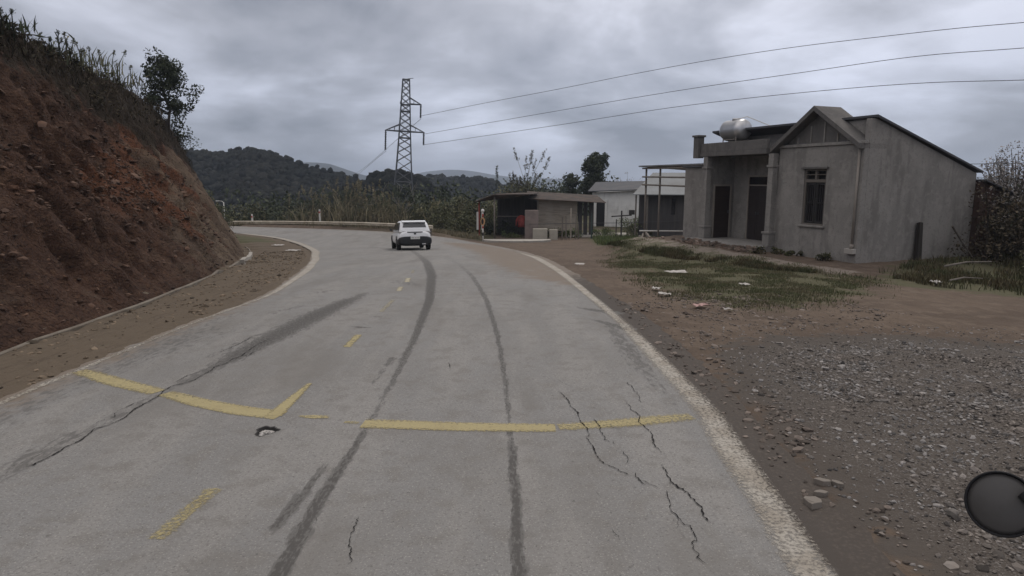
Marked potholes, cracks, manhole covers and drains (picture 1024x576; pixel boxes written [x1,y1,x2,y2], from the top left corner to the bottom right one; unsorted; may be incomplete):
pothole [255,426,280,436]
crack [558,379,711,563]
